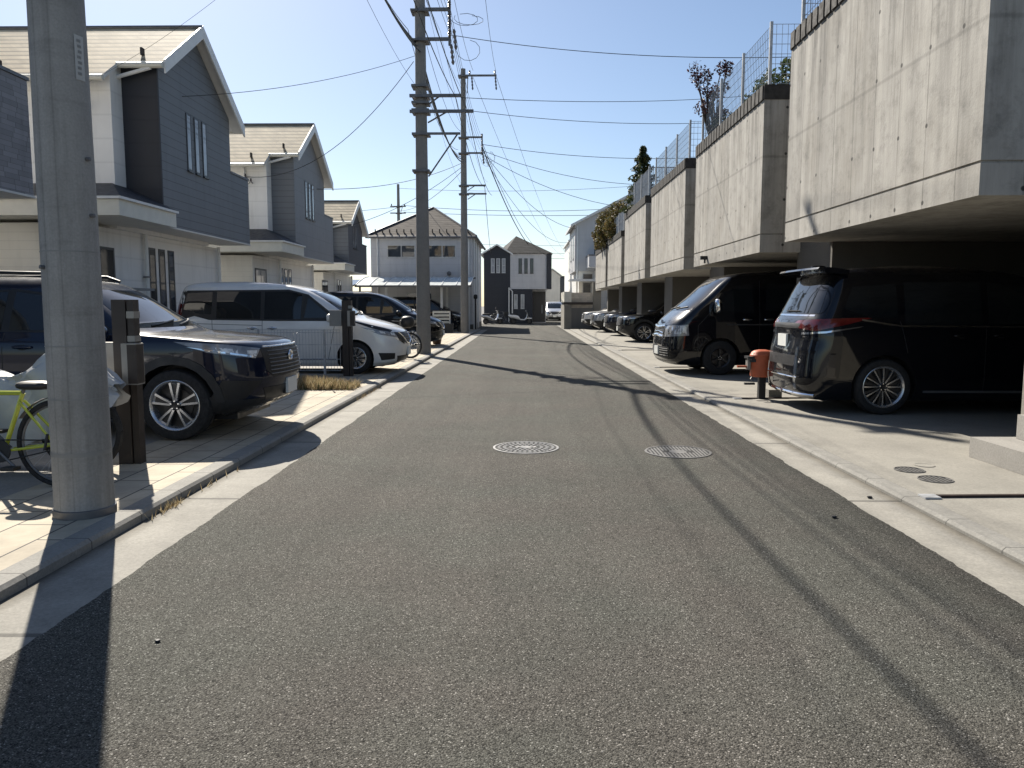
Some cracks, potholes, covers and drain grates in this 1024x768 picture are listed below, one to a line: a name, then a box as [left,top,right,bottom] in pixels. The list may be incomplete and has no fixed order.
manhole cover [493,441,559,454]
manhole cover [645,445,712,458]
manhole cover [917,475,954,483]
